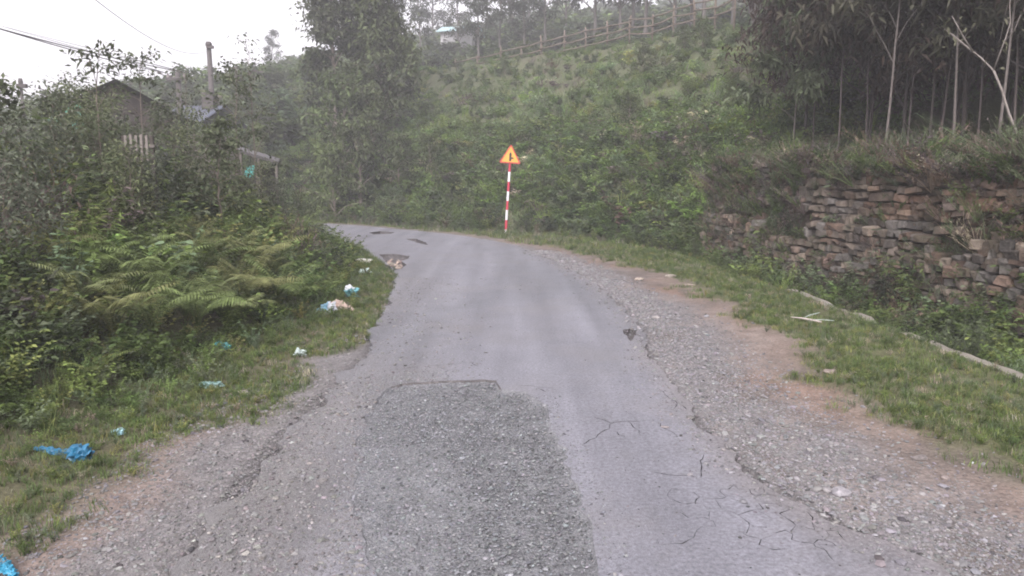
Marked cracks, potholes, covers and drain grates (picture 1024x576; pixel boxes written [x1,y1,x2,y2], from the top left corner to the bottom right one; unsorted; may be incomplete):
crack [657,486,846,560]
pothole [379,254,410,270]
crack [582,391,686,445]
